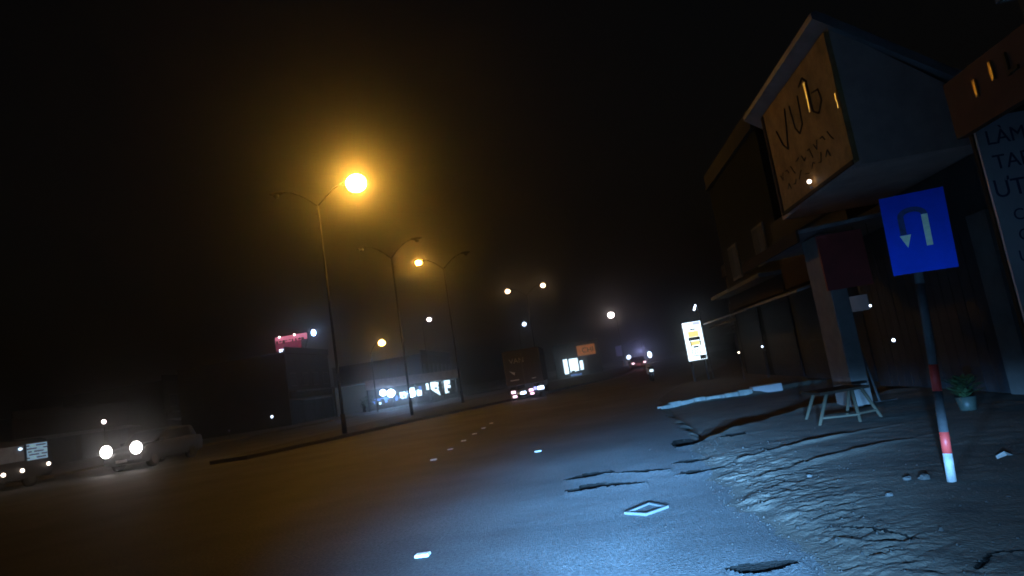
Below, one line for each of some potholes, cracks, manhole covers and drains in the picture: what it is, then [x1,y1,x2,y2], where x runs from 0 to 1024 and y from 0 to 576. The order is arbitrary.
crack [838,525,923,539]
crack [563,457,723,493]
pothole [725,559,804,574]
crack [973,549,1024,570]
